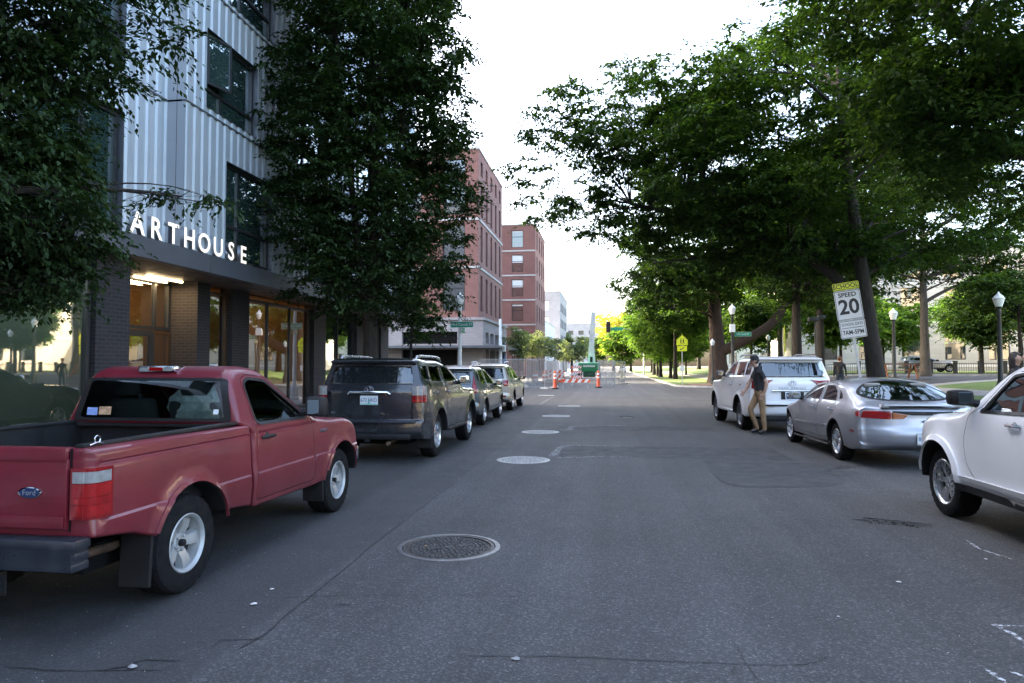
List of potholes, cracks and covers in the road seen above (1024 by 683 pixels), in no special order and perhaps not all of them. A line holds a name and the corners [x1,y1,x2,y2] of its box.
crack [293,594,478,605]
crack [8,659,176,671]
manhole cover [397,534,500,562]
crack [465,645,828,681]
manhole cover [497,456,550,464]
